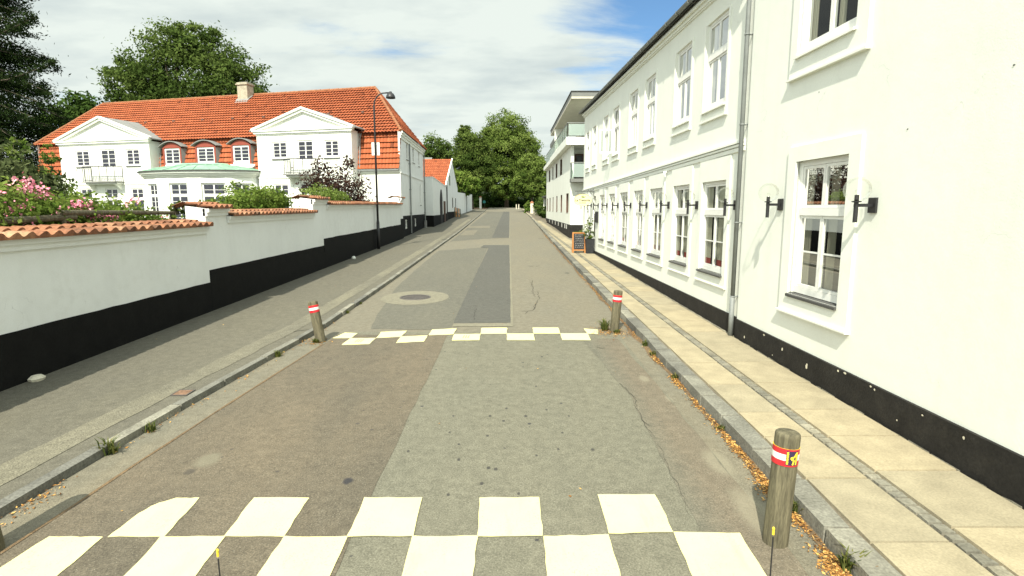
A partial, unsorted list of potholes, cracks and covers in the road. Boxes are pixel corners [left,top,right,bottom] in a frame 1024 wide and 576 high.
manhole cover [381,291,449,305]
